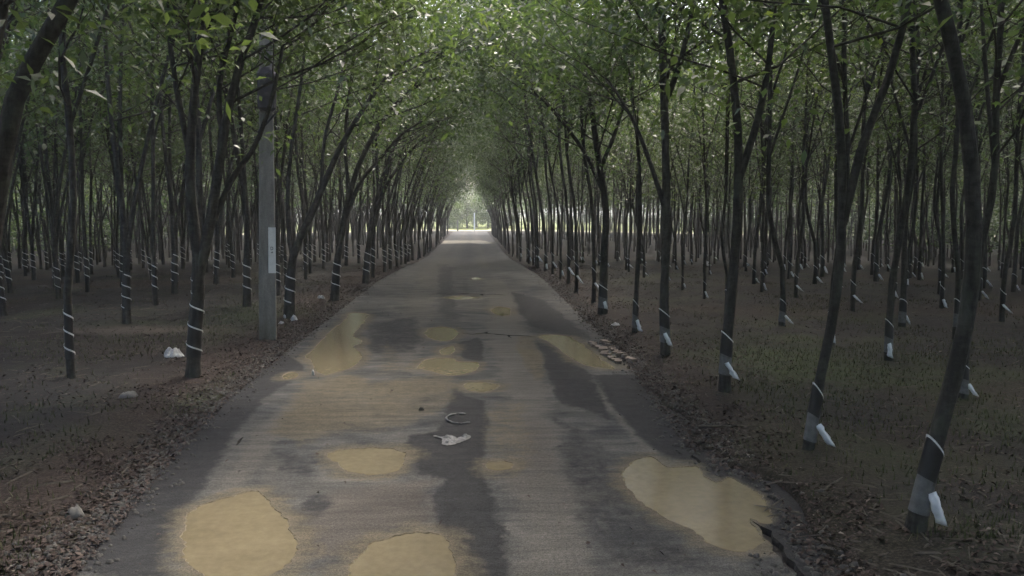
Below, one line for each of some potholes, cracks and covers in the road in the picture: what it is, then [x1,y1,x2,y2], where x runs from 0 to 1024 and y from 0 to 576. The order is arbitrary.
pothole [179,490,299,576]
pothole [620,456,774,552]
pothole [305,313,370,375]
pothole [327,447,406,475]
pothole [490,306,511,316]
pothole [538,334,615,369]
pothole [463,382,500,392]
pothole [485,460,514,471]
pothole [424,326,459,341]
pothole [347,531,458,576]
pothole [416,357,479,375]
